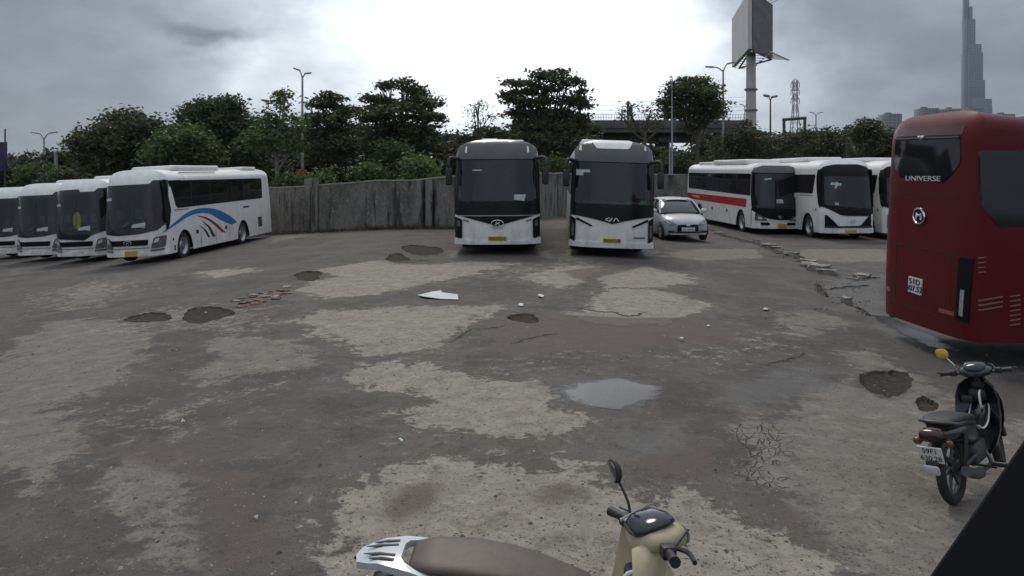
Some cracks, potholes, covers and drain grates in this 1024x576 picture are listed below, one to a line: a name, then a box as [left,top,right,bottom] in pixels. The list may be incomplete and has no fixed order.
pothole [848,368,926,402]
pothole [115,311,178,325]
pothole [498,312,547,326]
crack [729,423,805,489]
pothole [900,393,953,415]
pothole [289,271,329,282]
pothole [173,305,243,325]
crack [708,229,882,316]
pothole [380,253,414,263]
pothole [398,244,448,256]
crack [449,325,559,345]
crack [577,308,648,317]
